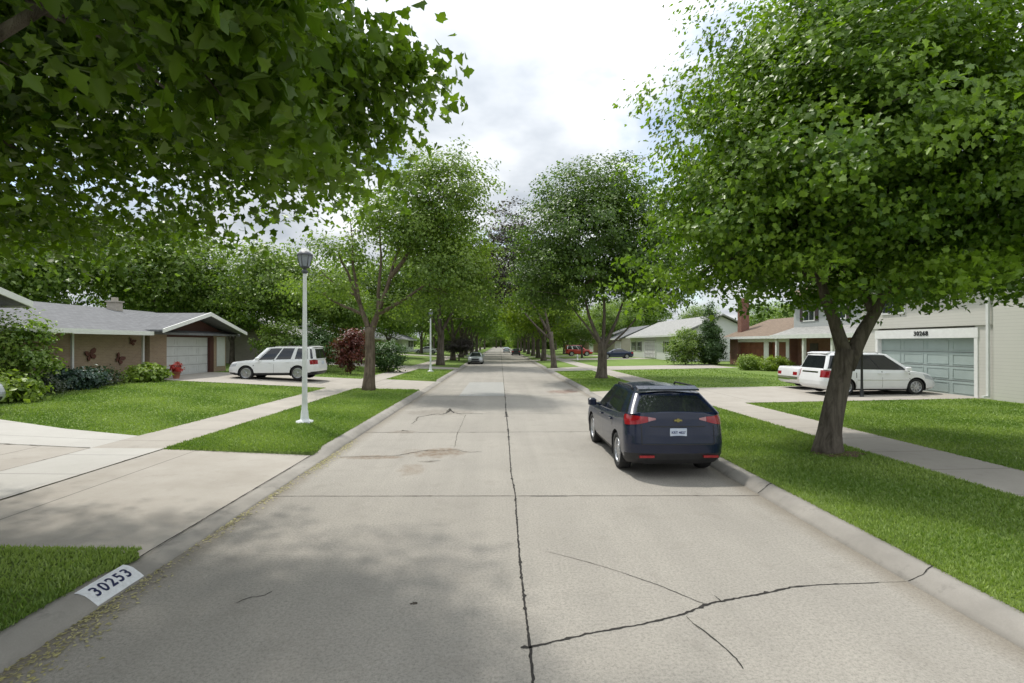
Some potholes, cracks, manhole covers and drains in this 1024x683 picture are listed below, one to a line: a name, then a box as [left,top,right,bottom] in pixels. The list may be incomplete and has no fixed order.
crack [521,551,932,669]
crack [356,408,478,461]
